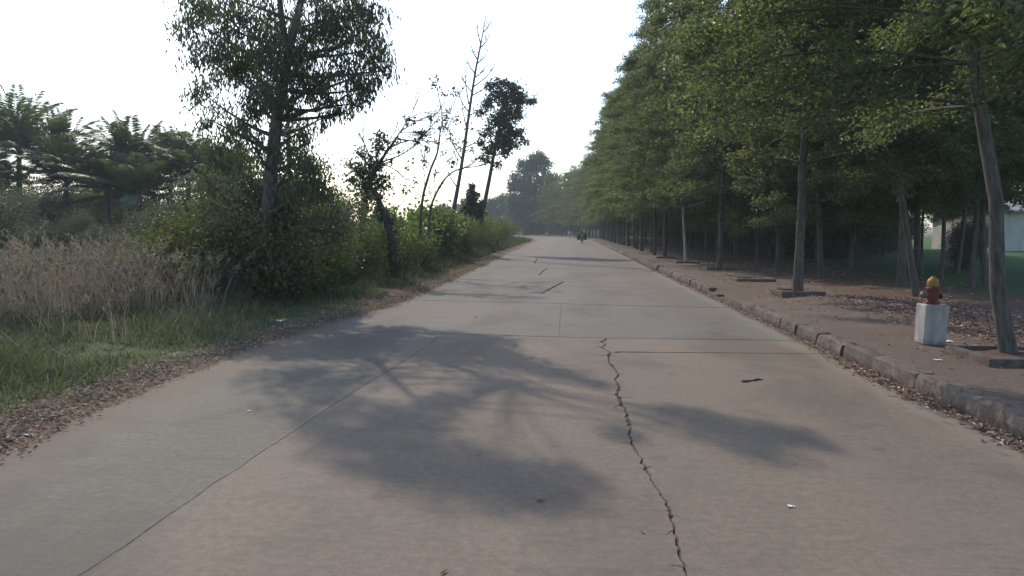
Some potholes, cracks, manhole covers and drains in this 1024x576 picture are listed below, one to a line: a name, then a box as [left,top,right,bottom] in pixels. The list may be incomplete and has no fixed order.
crack [595,339,811,576]
